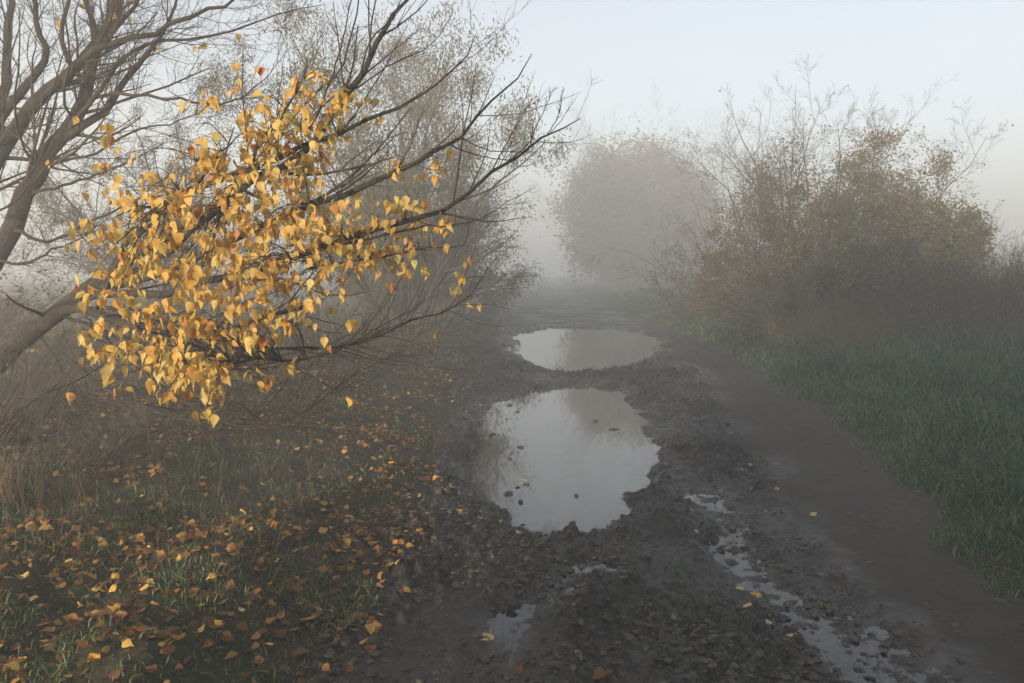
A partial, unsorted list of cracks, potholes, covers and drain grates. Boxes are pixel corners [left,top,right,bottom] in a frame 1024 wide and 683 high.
pothole [434,375,674,543]
pothole [492,323,688,372]
